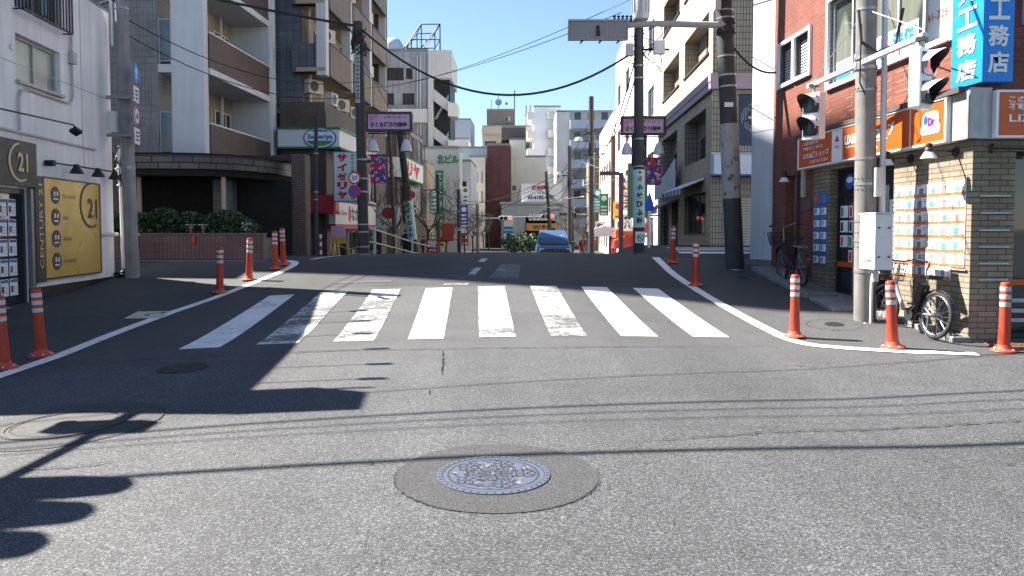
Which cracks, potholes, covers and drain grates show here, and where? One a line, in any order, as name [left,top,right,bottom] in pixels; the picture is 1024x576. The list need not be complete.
manhole cover [437,456,550,495]
utility cover [123,311,171,319]
manhole cover [157,362,209,374]
manhole cover [0,409,130,441]
